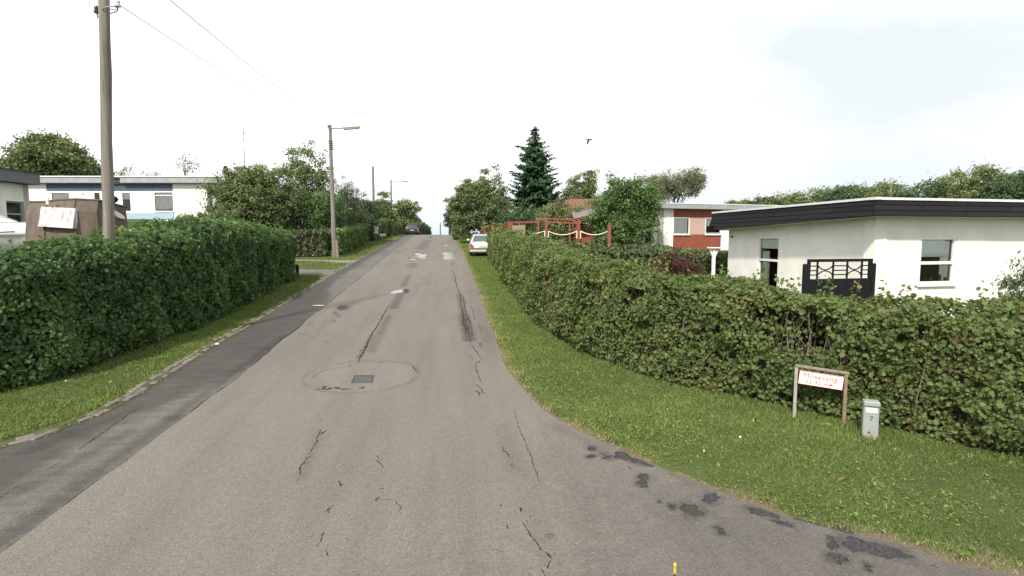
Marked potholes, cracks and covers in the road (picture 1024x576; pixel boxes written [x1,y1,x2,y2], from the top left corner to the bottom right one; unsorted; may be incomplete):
crack [451,263,486,397]
manhole cover [351,375,374,383]
crack [506,507,552,576]
crack [296,420,331,482]
crack [45,410,136,471]
crack [502,411,540,482]
